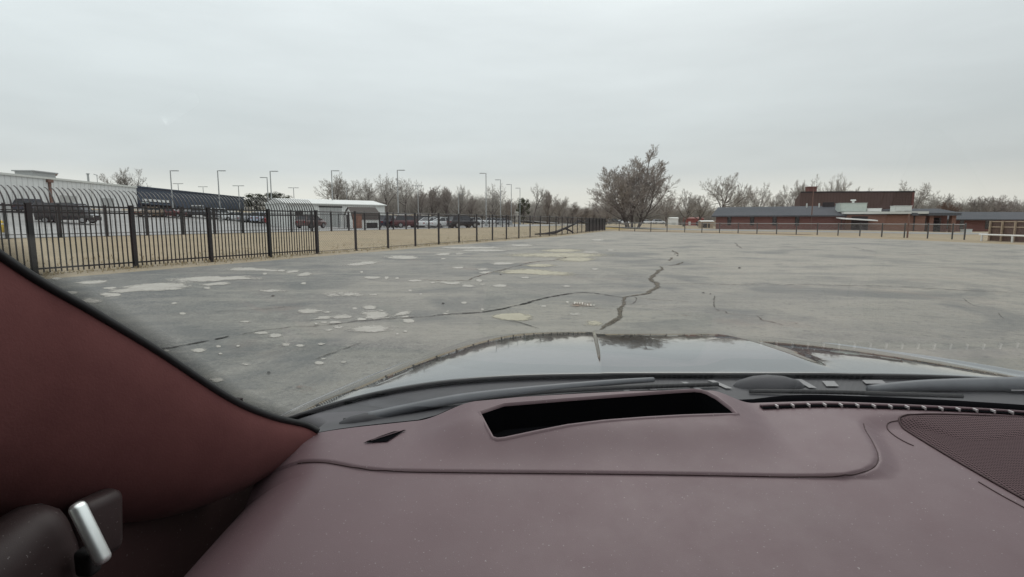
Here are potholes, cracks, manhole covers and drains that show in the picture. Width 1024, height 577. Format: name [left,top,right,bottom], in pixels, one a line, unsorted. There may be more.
crack [317,250,688,330]
